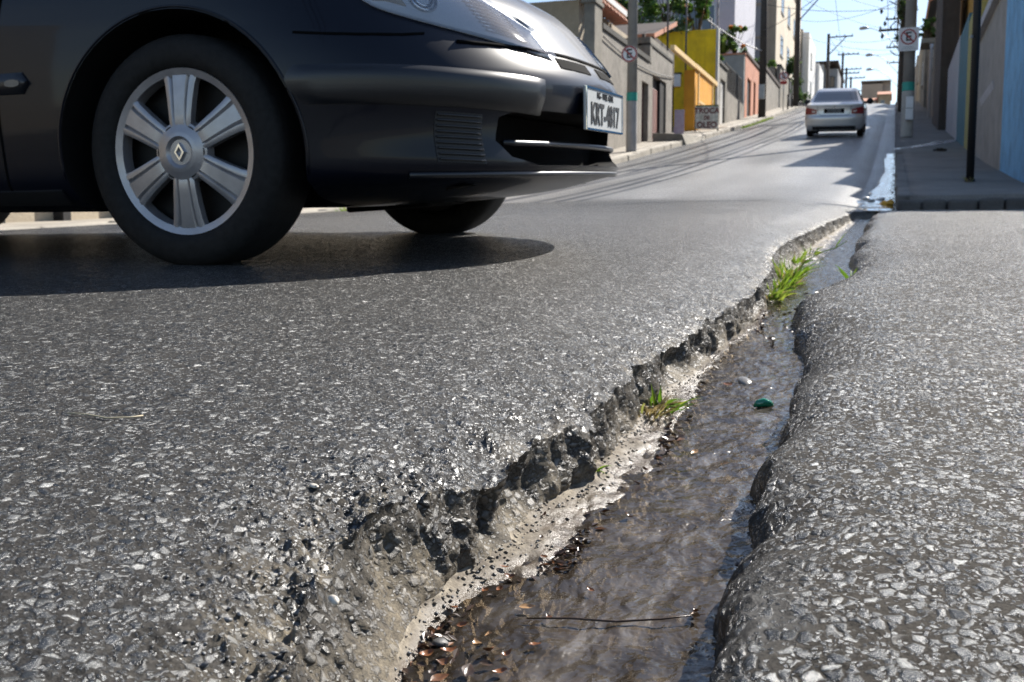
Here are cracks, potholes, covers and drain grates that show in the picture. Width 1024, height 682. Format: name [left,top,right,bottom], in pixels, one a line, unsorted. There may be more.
pothole [286,211,881,682]
